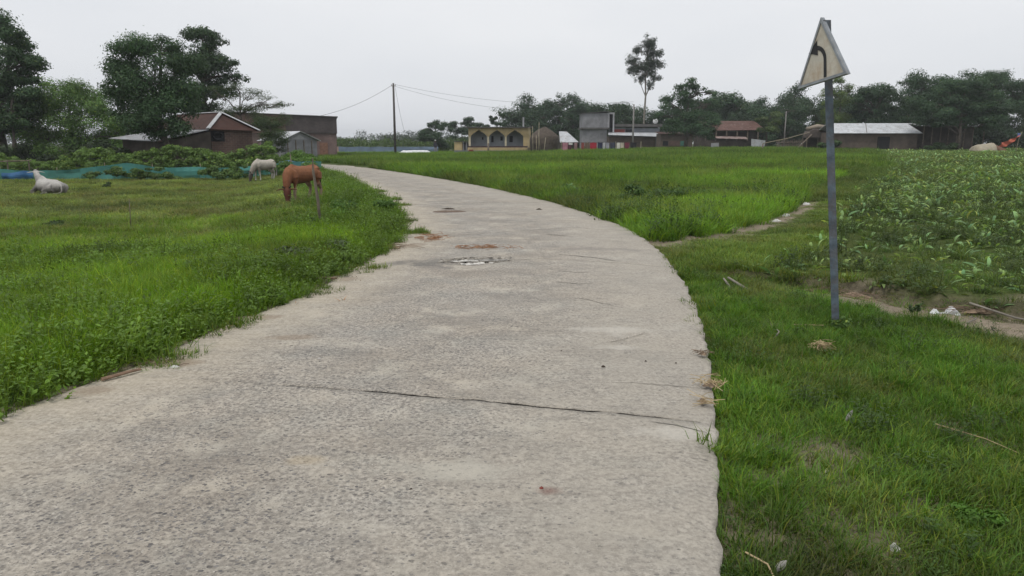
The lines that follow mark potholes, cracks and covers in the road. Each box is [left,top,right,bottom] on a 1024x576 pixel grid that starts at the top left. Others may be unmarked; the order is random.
crack [297,386,707,433]
